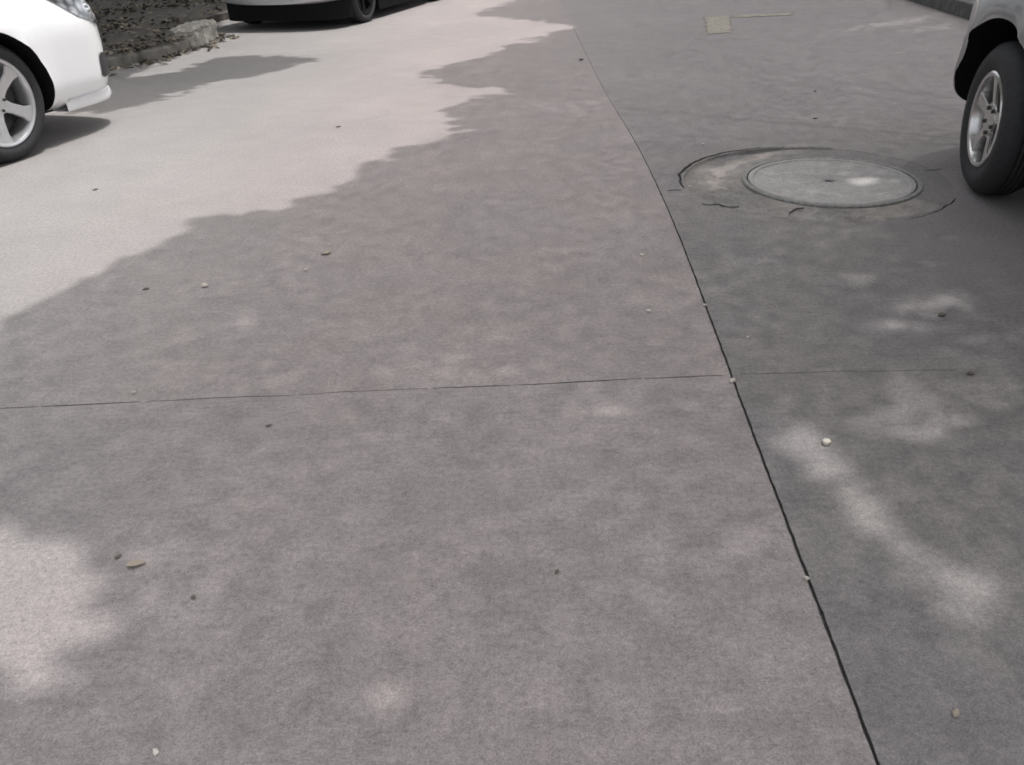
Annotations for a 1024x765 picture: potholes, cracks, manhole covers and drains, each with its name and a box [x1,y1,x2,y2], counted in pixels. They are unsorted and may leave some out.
manhole cover [684,147,956,223]
